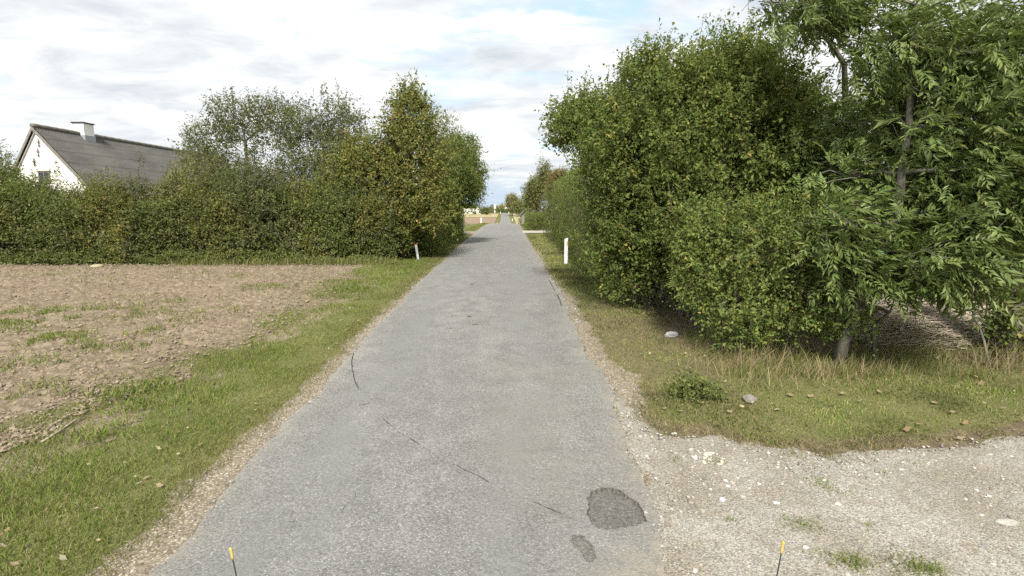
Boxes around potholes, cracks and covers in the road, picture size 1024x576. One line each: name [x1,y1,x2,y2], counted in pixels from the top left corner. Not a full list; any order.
crack [351,347,577,521]
